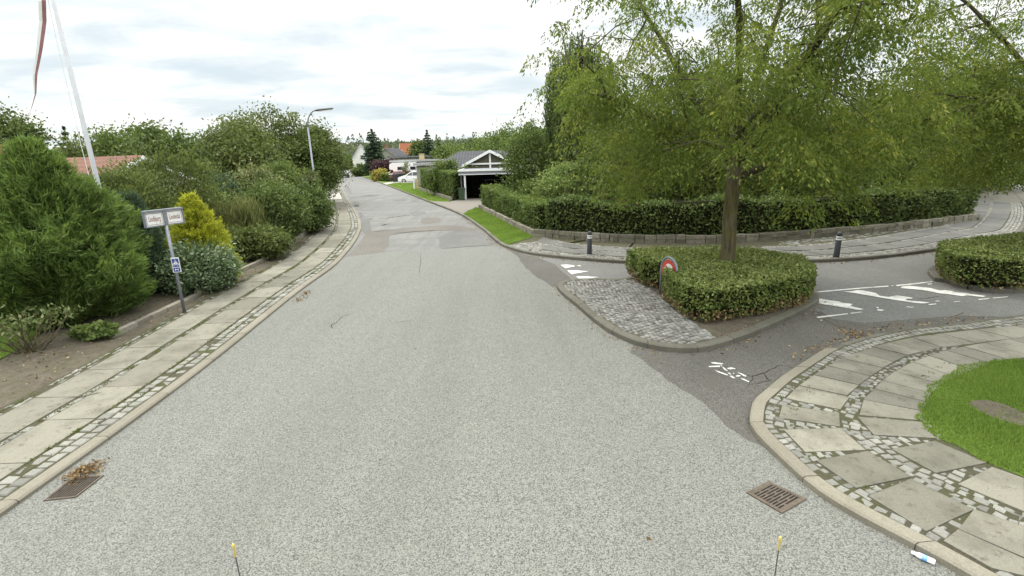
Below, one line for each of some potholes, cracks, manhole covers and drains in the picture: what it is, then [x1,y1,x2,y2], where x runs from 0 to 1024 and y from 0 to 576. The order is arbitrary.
drain grate [43,475,104,501]
drain grate [746,481,807,514]
